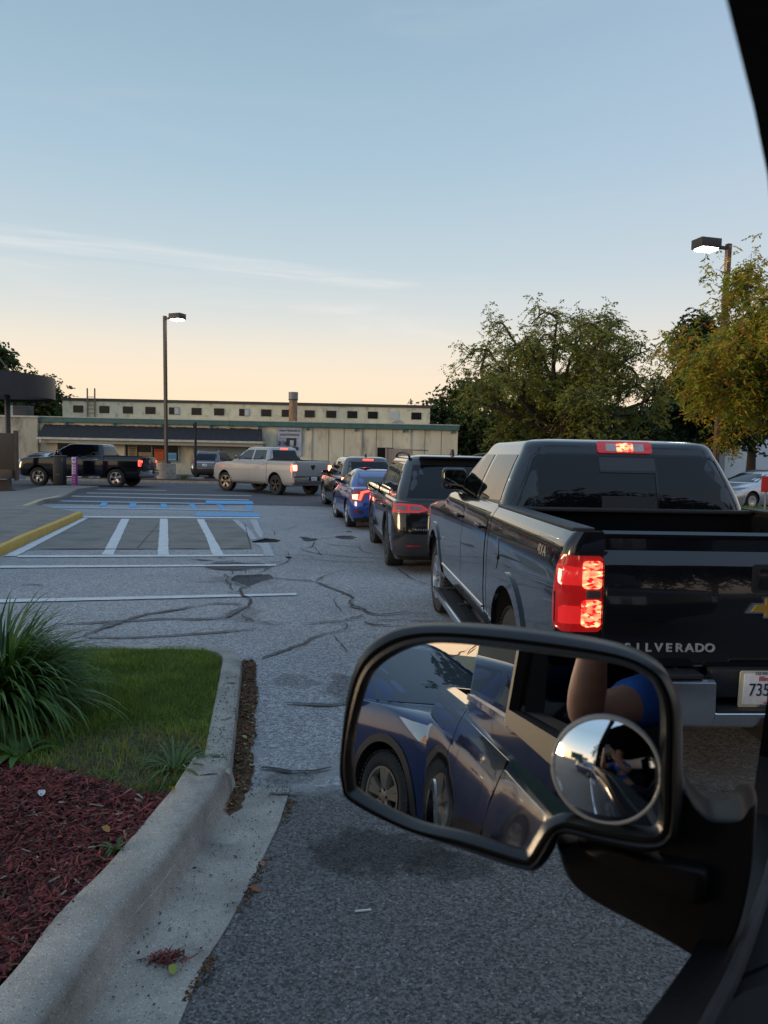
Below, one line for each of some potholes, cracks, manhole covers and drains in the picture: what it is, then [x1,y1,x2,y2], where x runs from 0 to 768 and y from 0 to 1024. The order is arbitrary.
pothole [231,574,274,586]
crack [188,537,430,626]
